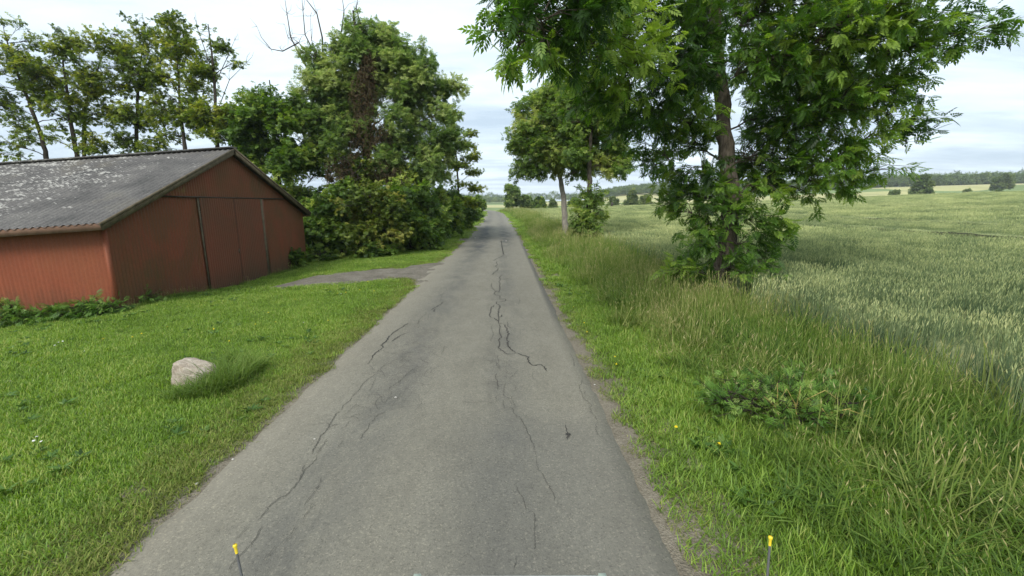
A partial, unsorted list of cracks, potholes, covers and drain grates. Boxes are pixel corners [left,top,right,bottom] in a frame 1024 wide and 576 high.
crack [228,291,445,571]
crack [464,262,555,499]
